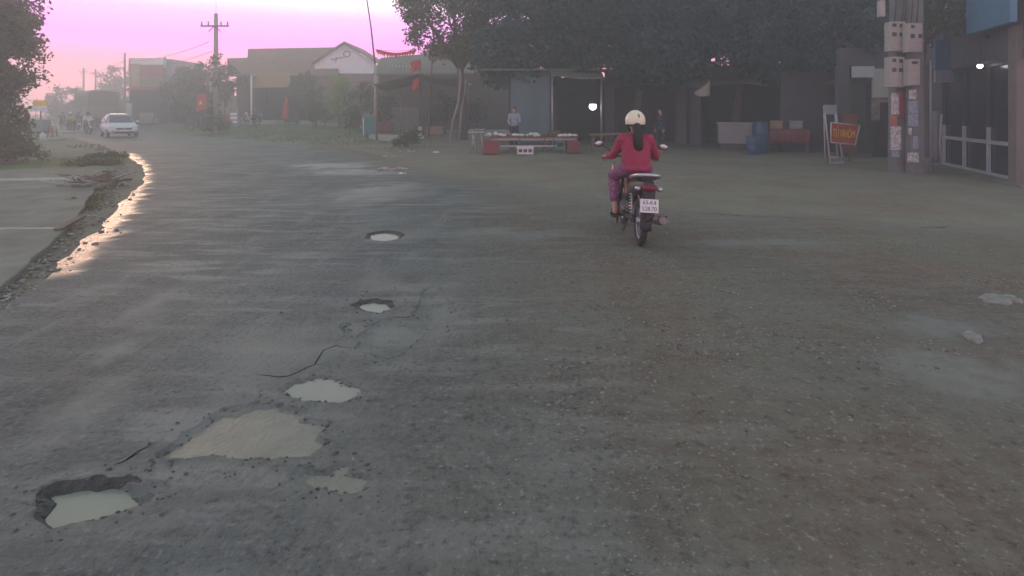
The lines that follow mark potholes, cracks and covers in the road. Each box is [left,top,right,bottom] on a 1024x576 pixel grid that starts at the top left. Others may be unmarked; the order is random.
pothole [260,371,379,408]
crack [258,345,351,377]
pothole [358,229,407,243]
pothole [5,461,189,542]
crack [113,442,155,465]
pothole [278,451,380,503]
pothole [131,396,345,478]
